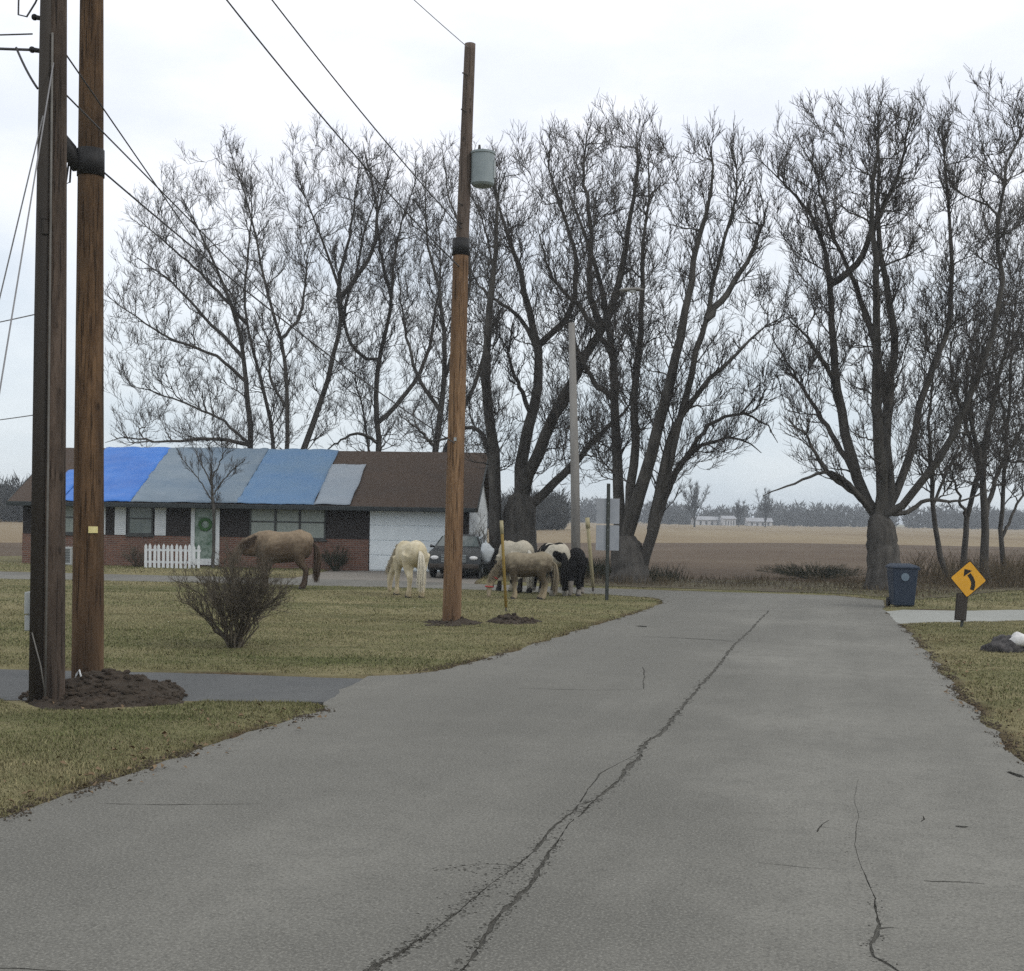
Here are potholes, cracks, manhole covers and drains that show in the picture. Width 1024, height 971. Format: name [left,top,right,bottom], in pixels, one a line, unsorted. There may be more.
crack [766,779,899,971]
